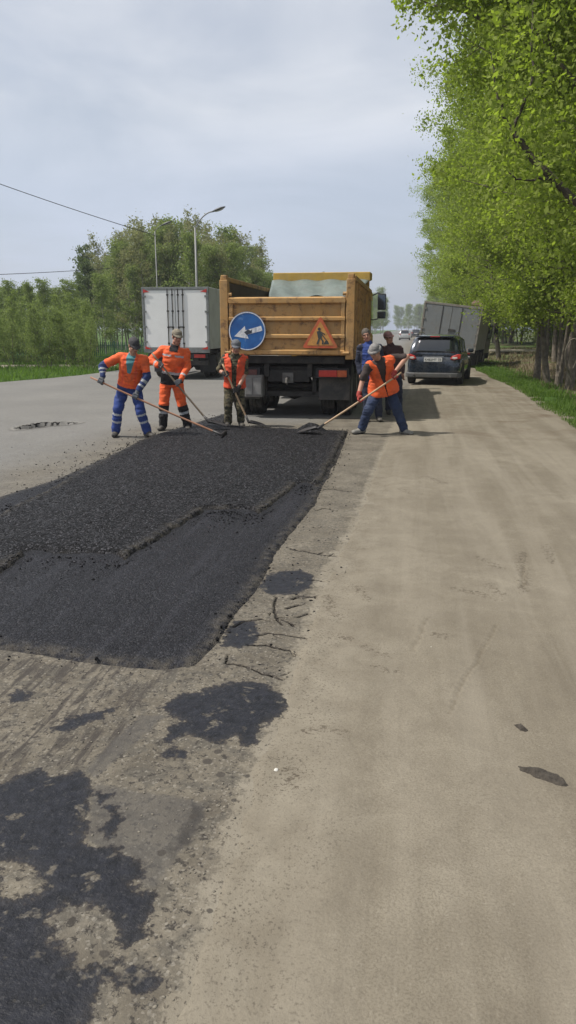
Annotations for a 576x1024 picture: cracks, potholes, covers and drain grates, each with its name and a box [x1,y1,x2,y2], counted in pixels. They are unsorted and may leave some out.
crack [225,580,323,681]
pothole [8,421,85,431]
